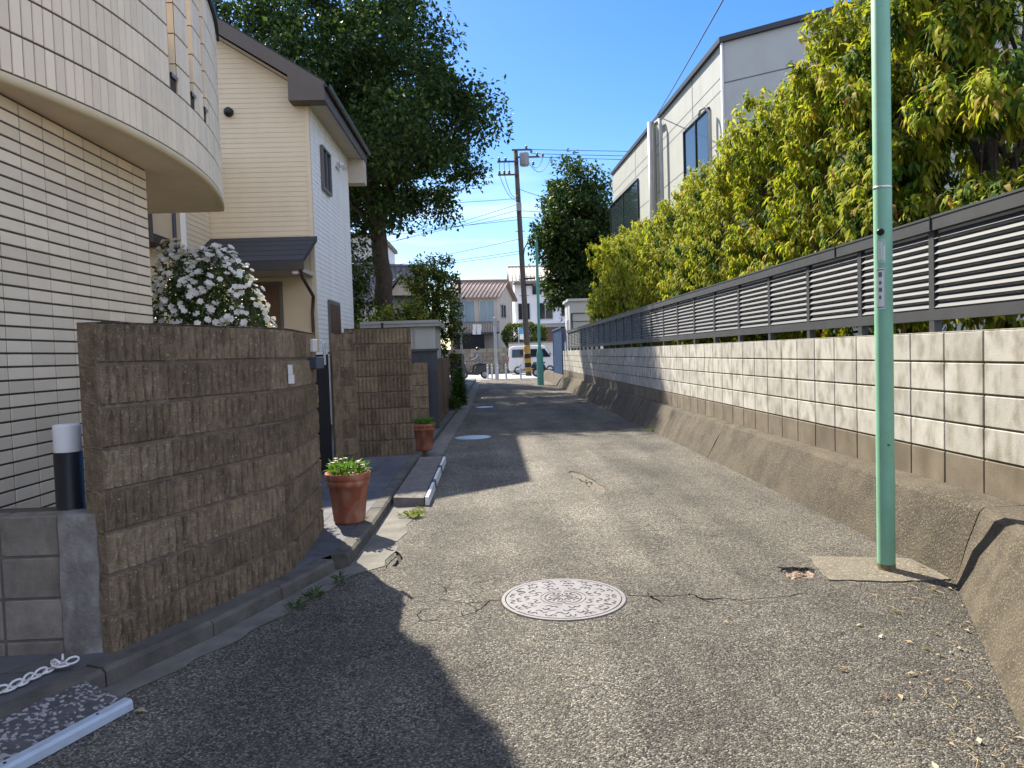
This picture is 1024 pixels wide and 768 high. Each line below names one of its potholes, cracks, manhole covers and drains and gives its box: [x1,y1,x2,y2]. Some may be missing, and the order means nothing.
pothole [567,471,606,494]
crack [627,591,802,607]
pothole [776,566,817,579]
crack [404,585,500,628]
manhole cover [500,579,627,621]
